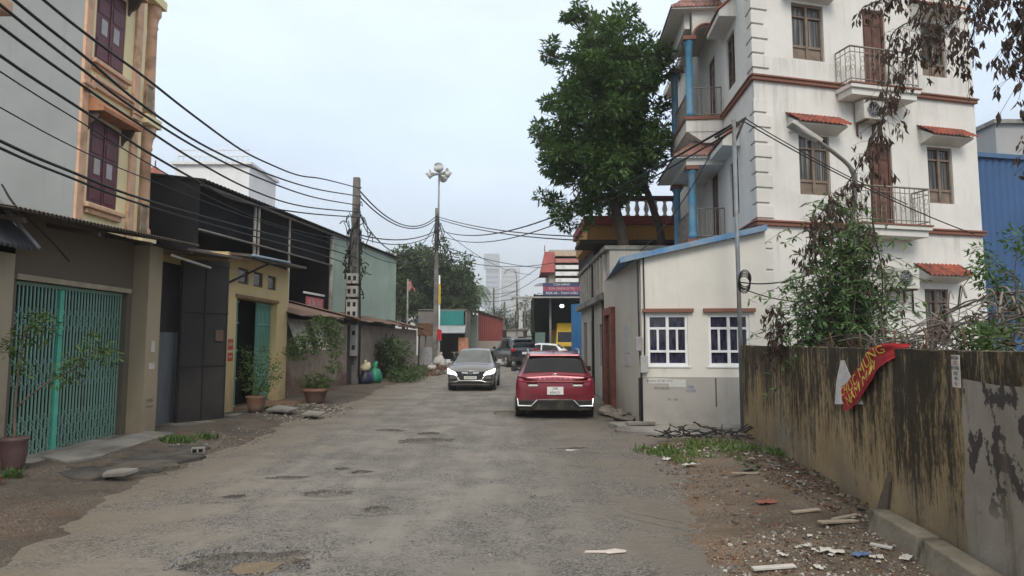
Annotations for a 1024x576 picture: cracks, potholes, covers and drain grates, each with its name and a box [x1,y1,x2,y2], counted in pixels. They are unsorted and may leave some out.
pothole [386,436,464,446]
pothole [247,473,328,483]
pothole [337,467,388,477]
pothole [148,543,340,576]
pothole [321,465,364,473]
pothole [283,486,372,501]
